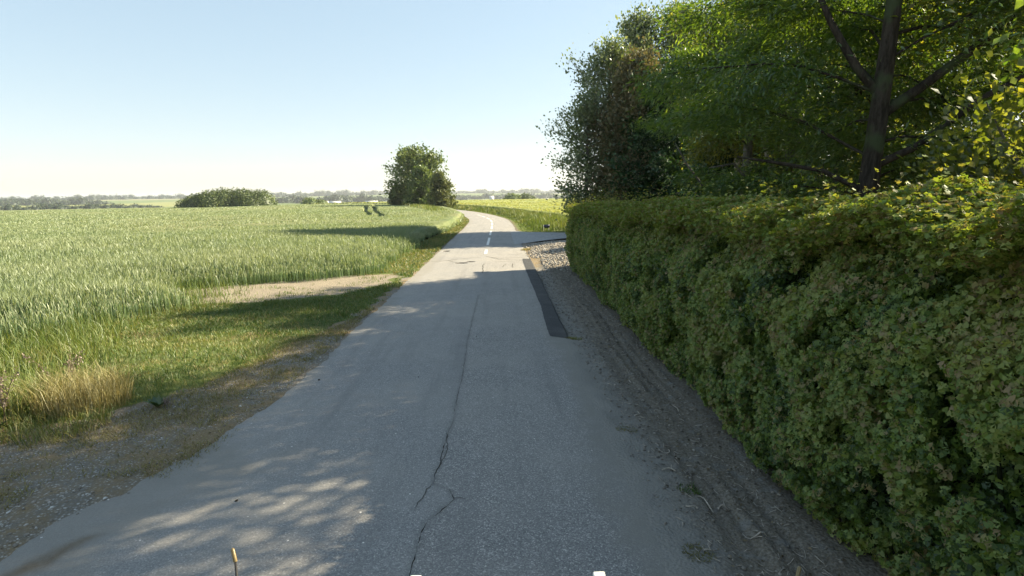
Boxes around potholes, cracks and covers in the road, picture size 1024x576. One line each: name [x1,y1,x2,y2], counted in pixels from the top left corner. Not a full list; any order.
crack [409,311,475,576]
